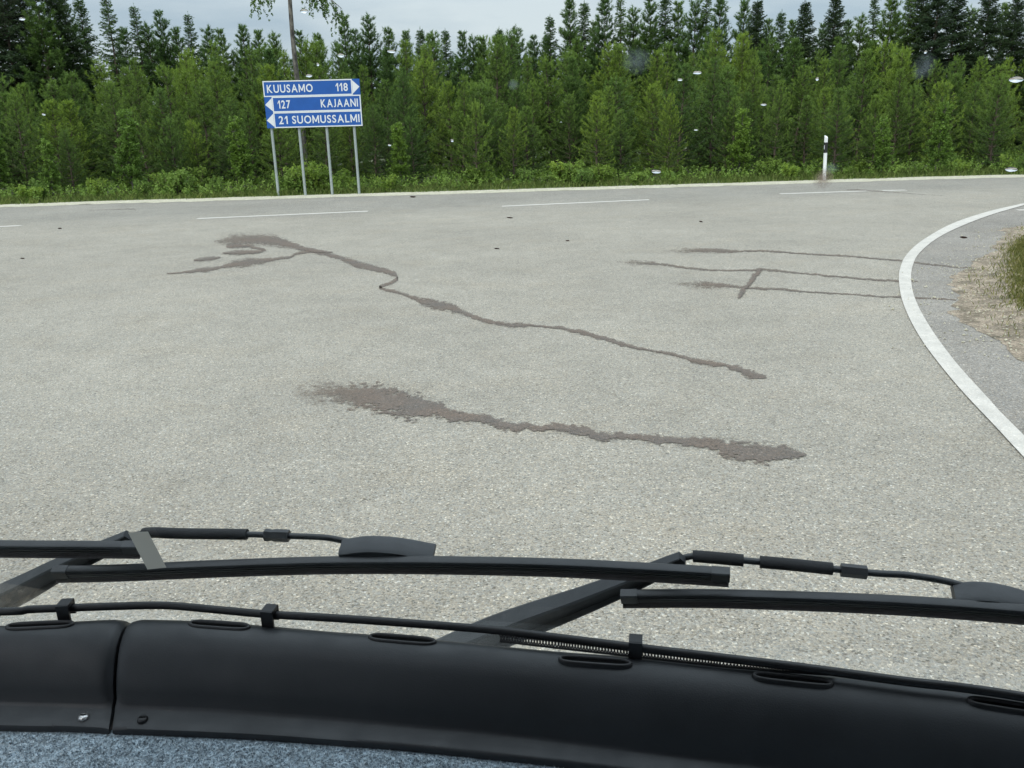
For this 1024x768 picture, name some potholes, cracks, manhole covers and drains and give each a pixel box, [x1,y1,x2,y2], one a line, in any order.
crack [167,233,807,465]
